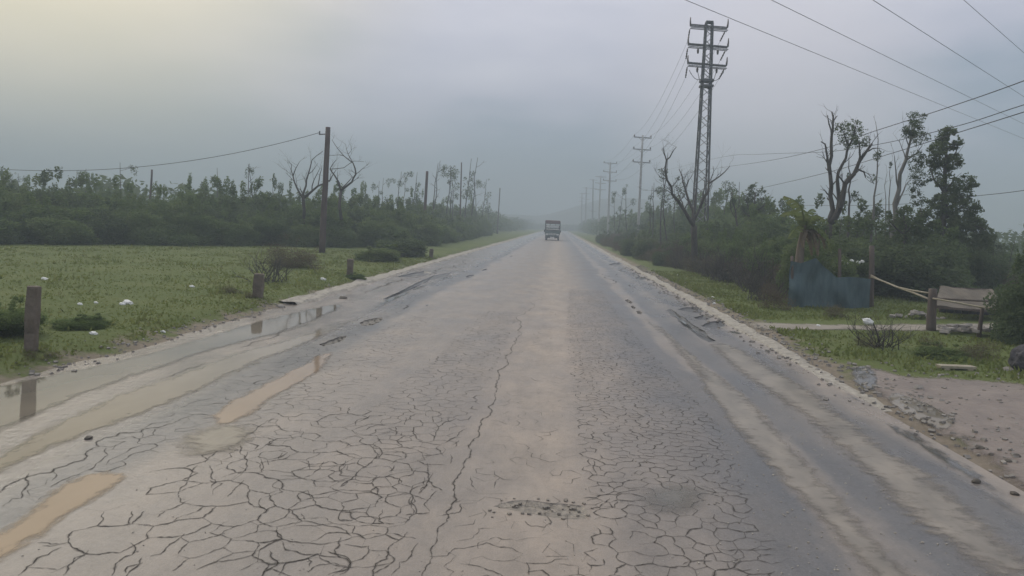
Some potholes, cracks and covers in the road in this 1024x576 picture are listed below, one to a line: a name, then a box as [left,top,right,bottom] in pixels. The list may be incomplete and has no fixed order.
crack [20,291,777,576]
pothole [319,336,346,346]
pothole [702,321,725,329]
pothole [360,318,383,326]
pothole [488,498,594,524]
pothole [668,309,716,342]
